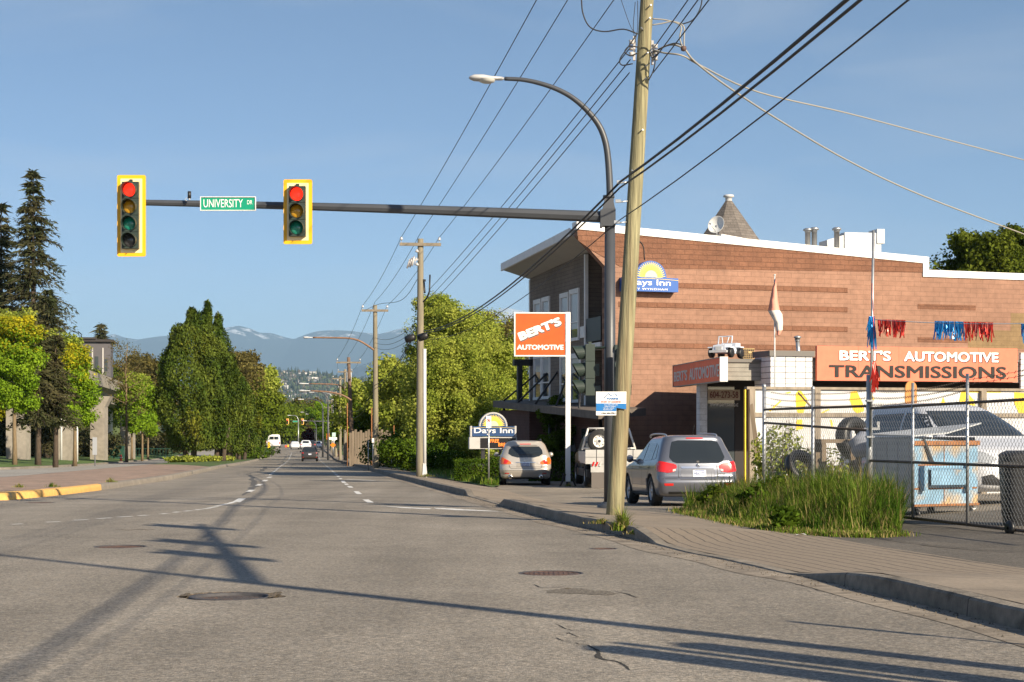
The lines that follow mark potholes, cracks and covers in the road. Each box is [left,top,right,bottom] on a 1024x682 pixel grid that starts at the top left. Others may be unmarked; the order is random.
manhole cover [188,592,273,600]
crack [557,624,630,670]
